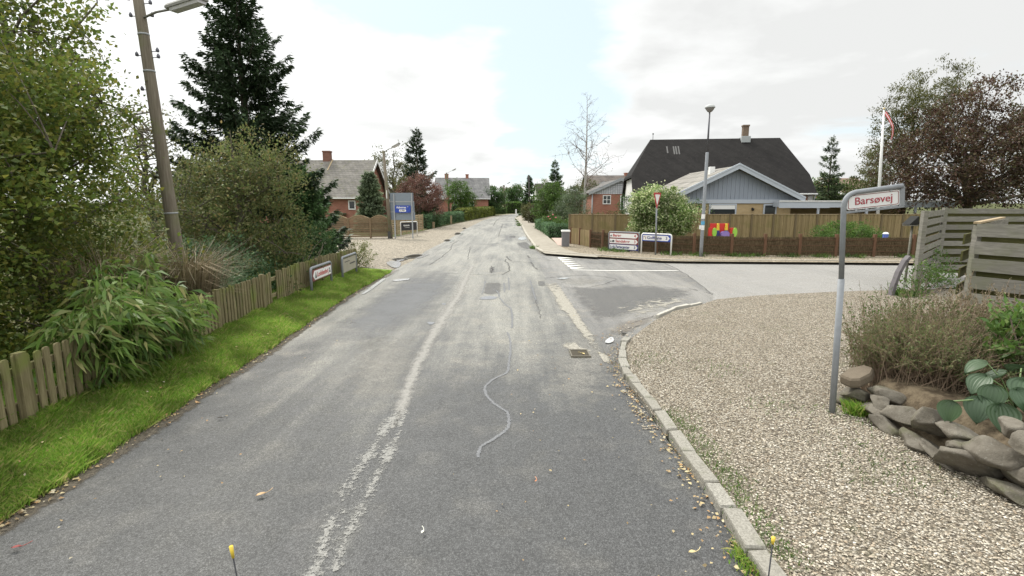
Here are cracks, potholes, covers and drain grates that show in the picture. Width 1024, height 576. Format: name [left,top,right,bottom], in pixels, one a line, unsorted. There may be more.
drain grate [569,349,591,358]
